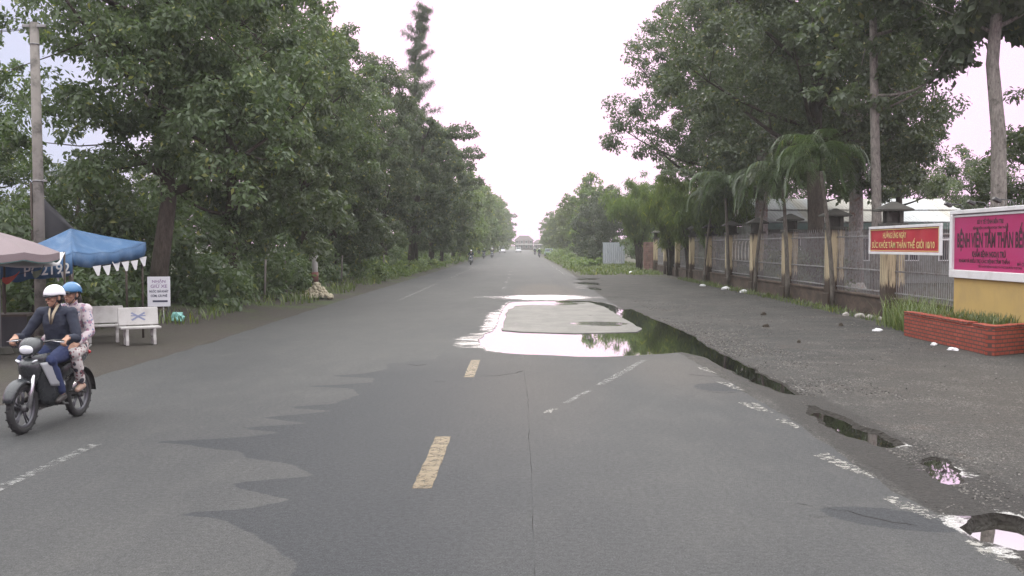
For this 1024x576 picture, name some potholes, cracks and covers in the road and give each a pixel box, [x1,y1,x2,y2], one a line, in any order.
crack [498,371,535,572]
pothole [806,405,905,448]
pothole [920,456,964,485]
pothole [478,301,800,395]
pothole [960,512,1024,550]
